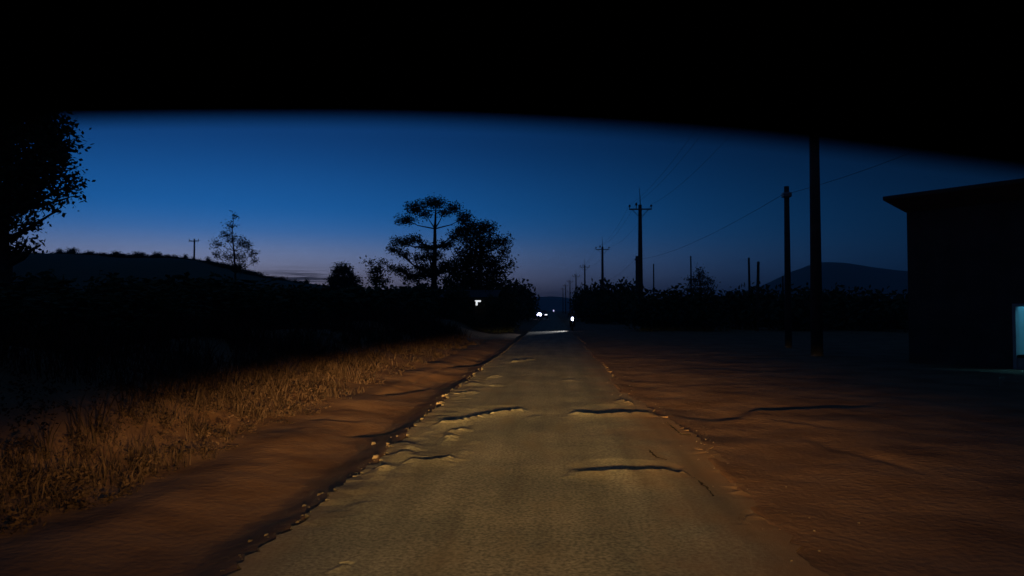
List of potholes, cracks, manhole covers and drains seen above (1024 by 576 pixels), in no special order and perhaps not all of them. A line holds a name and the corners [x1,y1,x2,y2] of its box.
crack [649,422,708,460]
